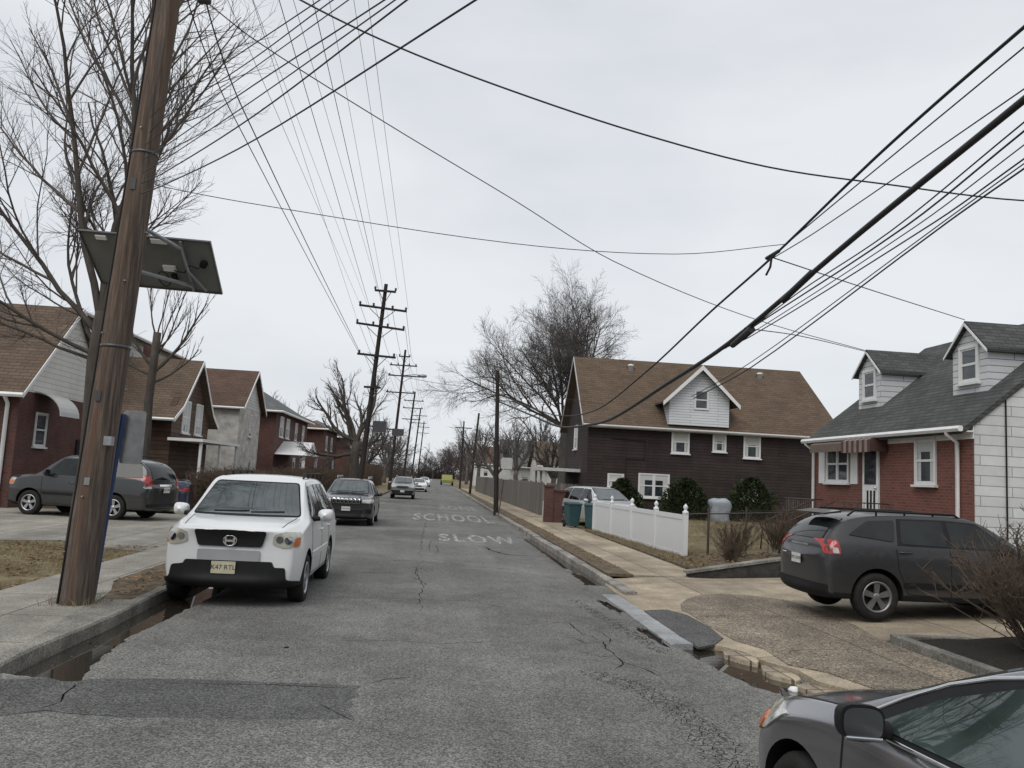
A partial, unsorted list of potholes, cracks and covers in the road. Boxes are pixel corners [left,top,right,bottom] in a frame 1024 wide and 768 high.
crack [353,597,758,768]
crack [5,684,124,717]
